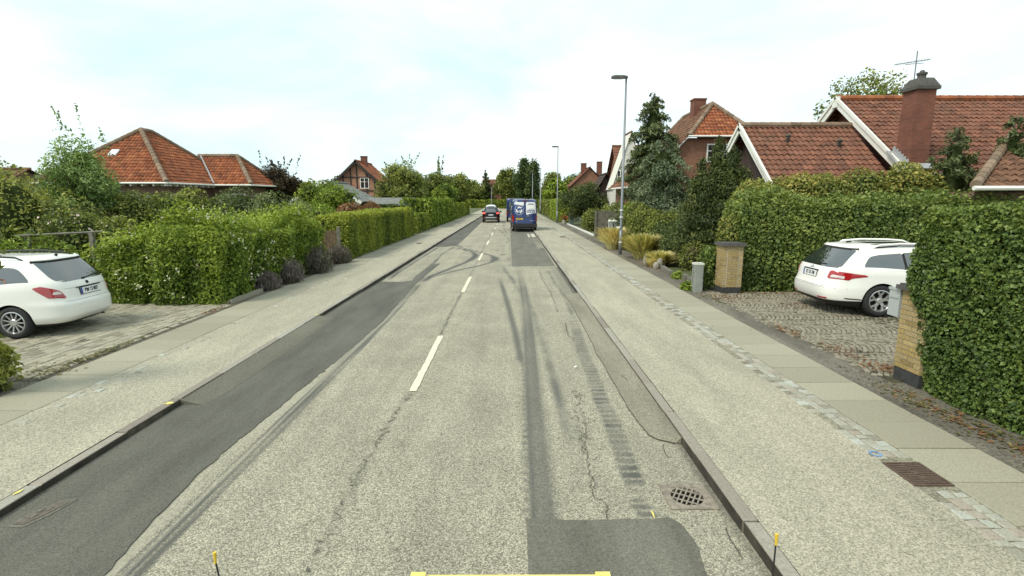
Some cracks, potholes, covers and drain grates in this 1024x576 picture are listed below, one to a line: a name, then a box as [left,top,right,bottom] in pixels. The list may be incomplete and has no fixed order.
drain grate [7,498,78,528]
drain grate [882,462,955,487]
drain grate [658,483,719,510]
crack [562,390,609,517]
